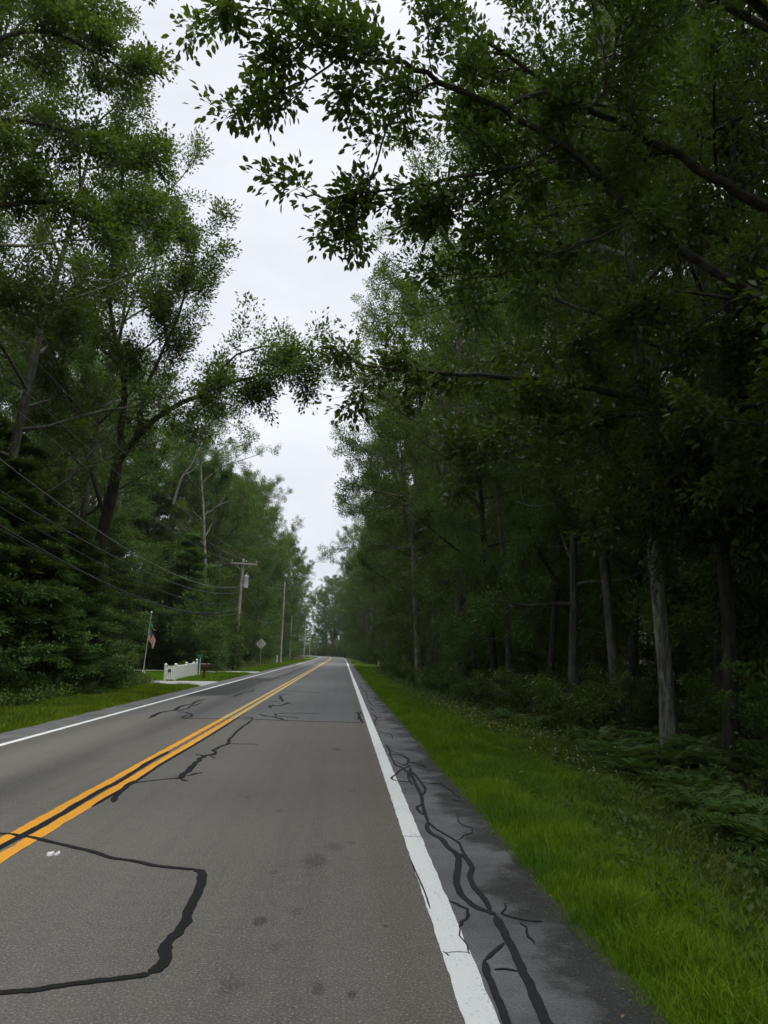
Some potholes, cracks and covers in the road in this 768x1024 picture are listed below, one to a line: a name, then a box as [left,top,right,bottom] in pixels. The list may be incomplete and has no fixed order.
crack [180,684,473,840]
